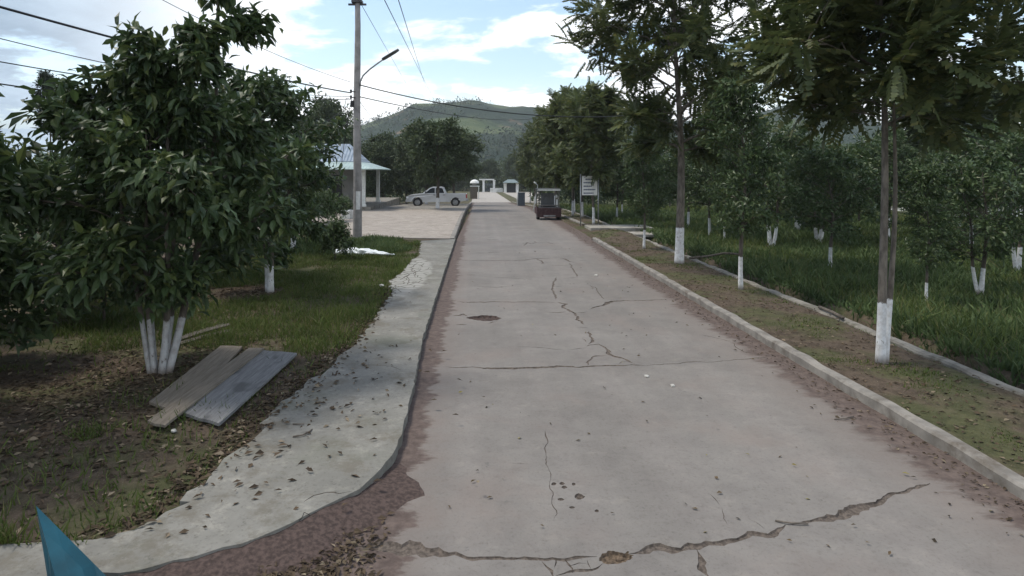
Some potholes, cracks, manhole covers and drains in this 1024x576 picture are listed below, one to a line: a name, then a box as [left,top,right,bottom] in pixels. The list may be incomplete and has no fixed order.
crack [544,432,557,518]
crack [537,264,604,350]
